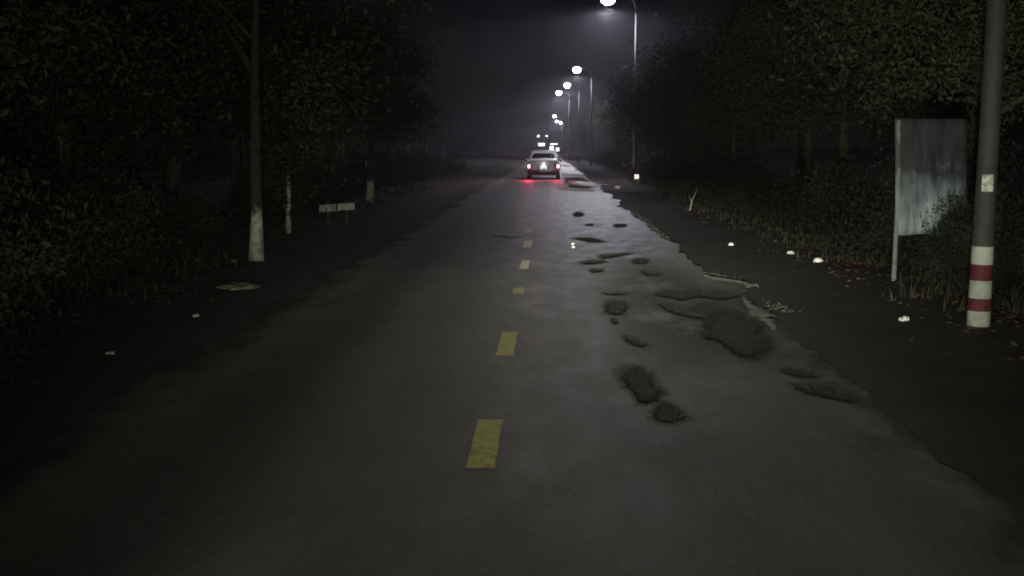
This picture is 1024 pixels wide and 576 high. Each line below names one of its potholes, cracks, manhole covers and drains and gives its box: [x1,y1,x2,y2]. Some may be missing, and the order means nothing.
pothole [565,177,591,189]
pothole [699,307,774,361]
pothole [792,383,858,404]
pothole [605,300,629,315]
pothole [623,335,648,348]
pothole [620,366,663,404]
pothole [653,402,689,423]
pothole [781,366,821,378]
